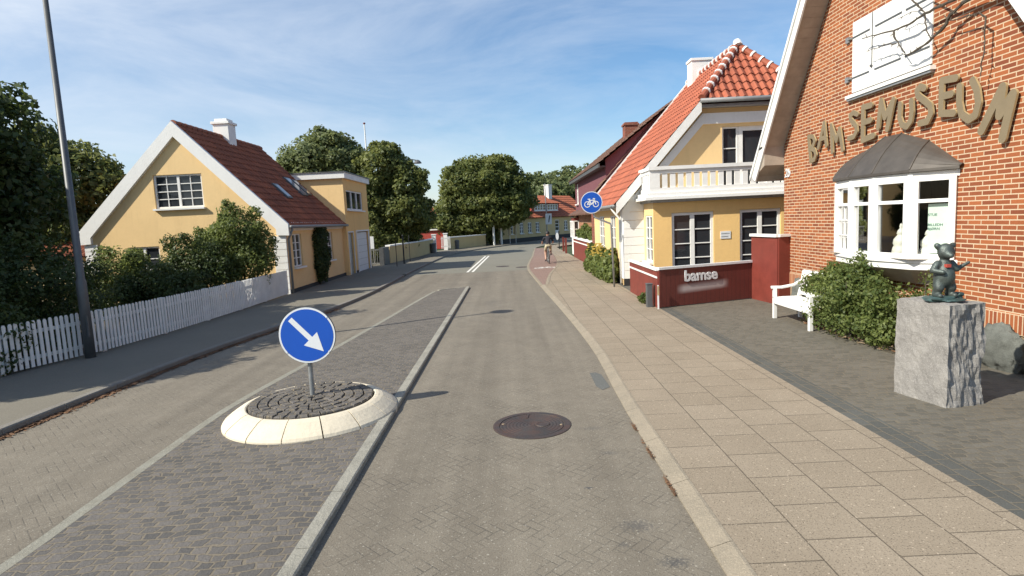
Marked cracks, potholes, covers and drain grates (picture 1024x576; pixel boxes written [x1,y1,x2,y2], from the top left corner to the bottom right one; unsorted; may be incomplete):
manhole cover [493,412,571,440]
